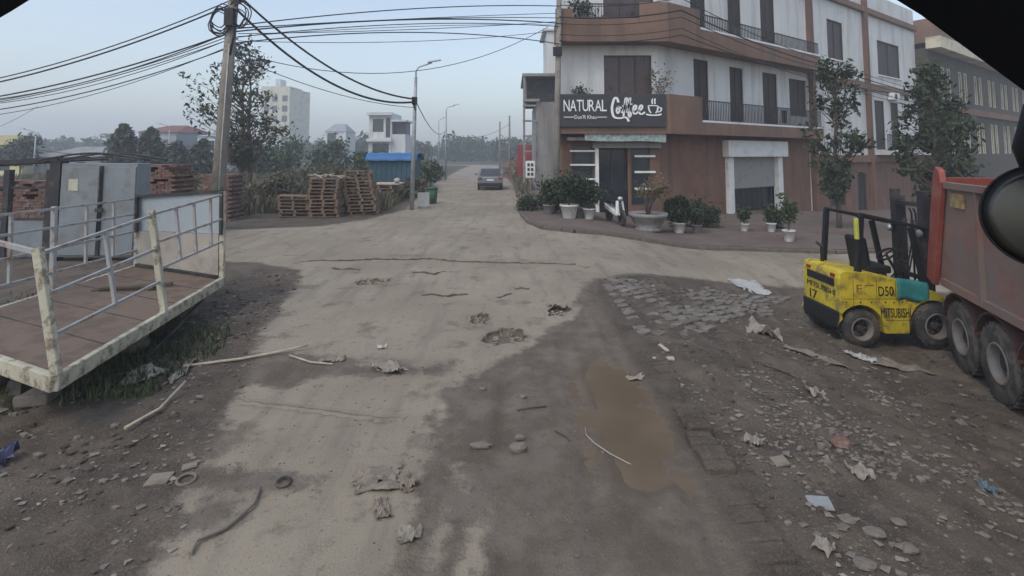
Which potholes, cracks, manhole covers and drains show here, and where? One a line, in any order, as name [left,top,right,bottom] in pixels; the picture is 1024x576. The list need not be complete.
pothole [467,312,494,326]
pothole [352,277,395,286]
crack [234,396,408,422]
crack [299,258,576,276]
pothole [545,305,575,317]
crack [498,288,530,299]
pothole [478,327,531,347]
